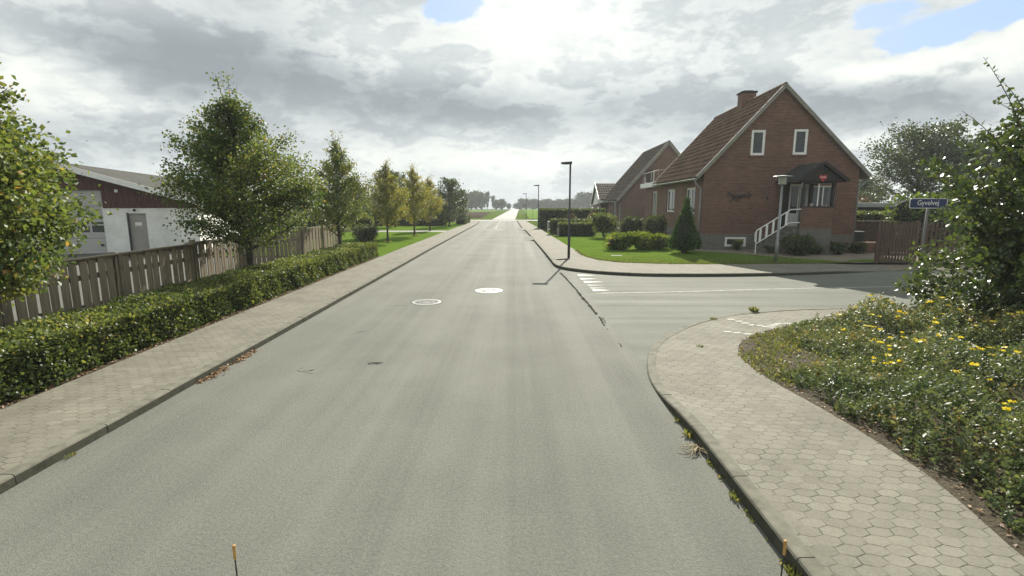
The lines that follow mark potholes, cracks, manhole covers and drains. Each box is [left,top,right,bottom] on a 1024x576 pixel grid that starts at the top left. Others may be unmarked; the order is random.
crack [560,273,622,347]
